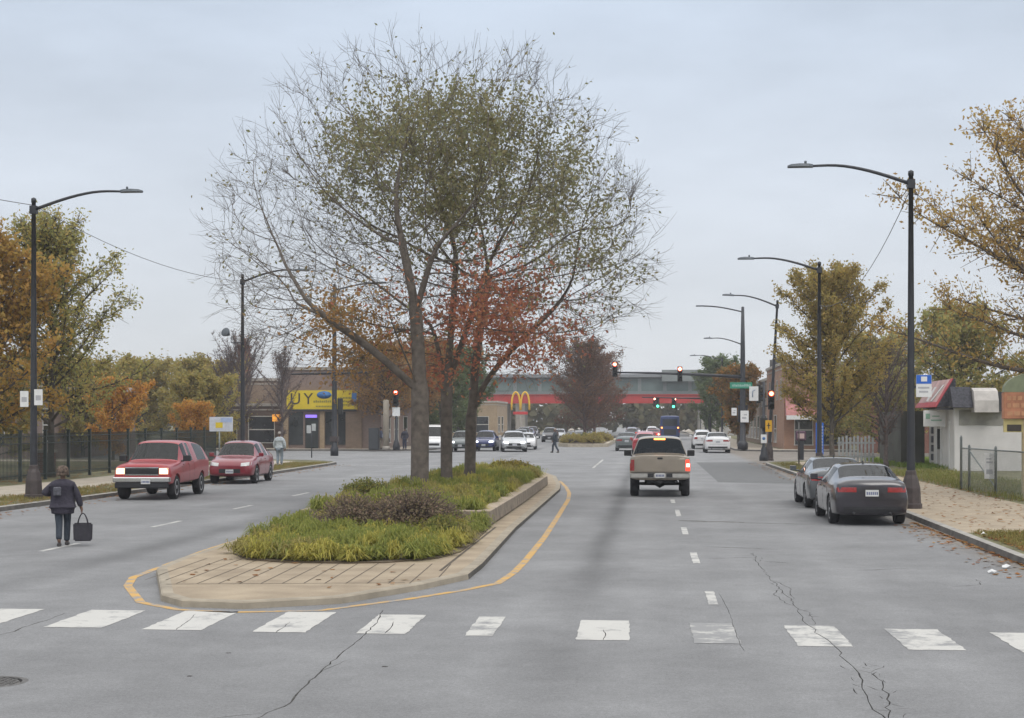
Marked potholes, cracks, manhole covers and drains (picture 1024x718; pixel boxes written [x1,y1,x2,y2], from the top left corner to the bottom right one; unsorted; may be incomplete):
crack [217,611,393,718]
crack [724,547,910,718]
manhole cover [0,676,28,687]
